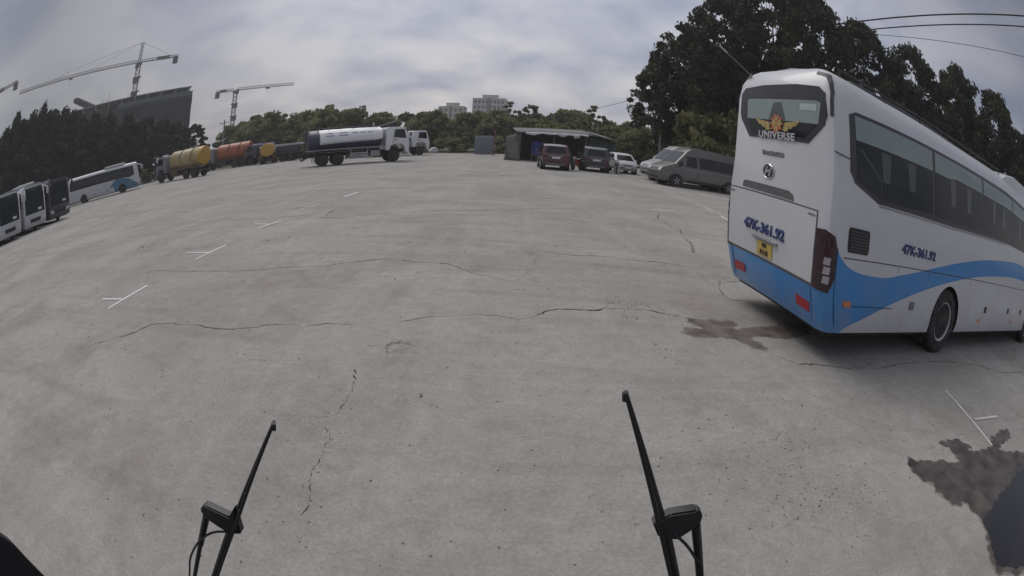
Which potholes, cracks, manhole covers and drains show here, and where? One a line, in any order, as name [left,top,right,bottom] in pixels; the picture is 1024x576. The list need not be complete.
crack [300,370,357,516]
crack [773,347,1020,373]
crack [147,259,509,281]
crack [89,307,677,347]
crack [522,201,771,306]
pothole [385,340,412,355]
